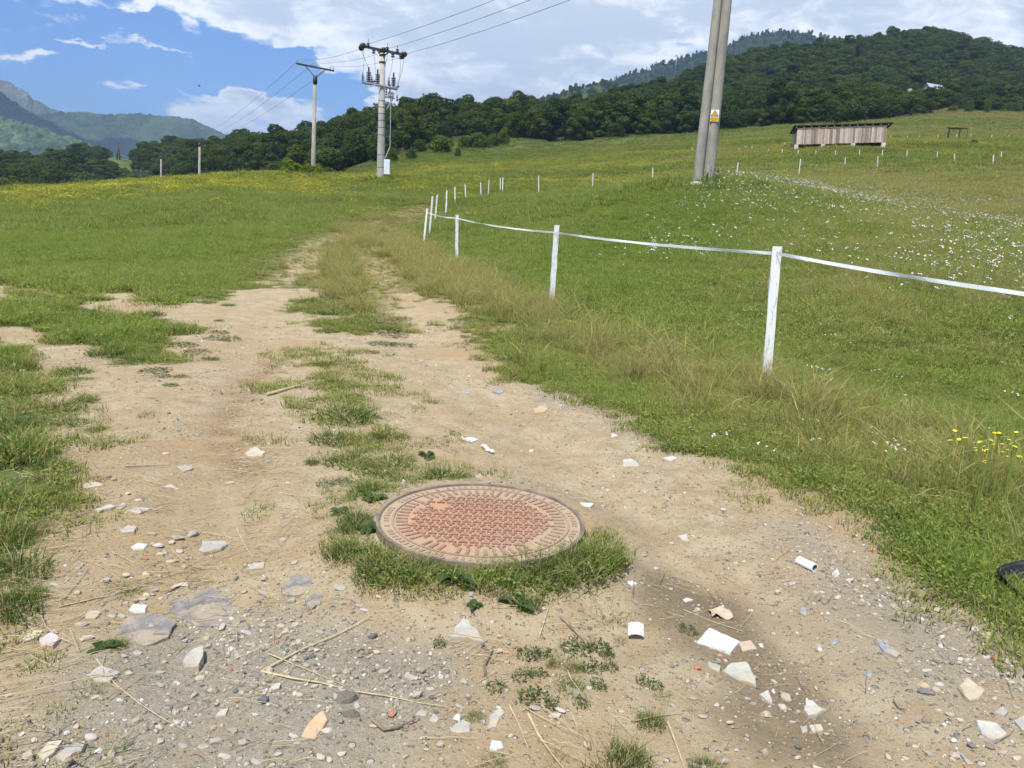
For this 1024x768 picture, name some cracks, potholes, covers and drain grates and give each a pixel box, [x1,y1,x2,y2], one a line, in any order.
manhole cover [371,483,586,575]
